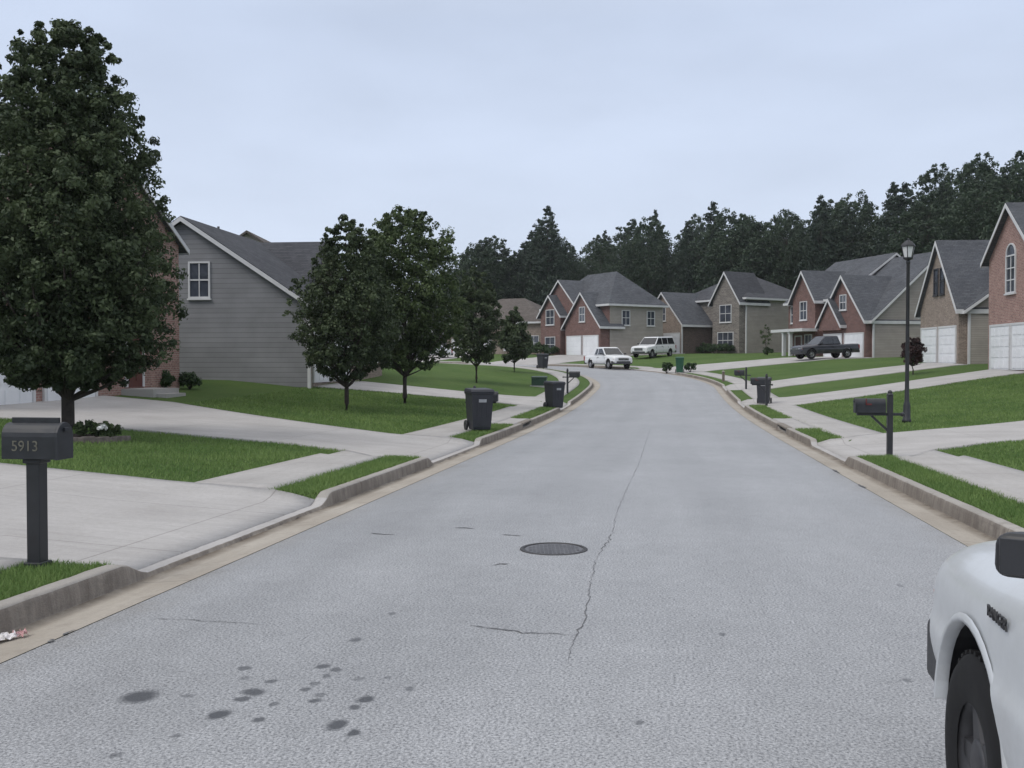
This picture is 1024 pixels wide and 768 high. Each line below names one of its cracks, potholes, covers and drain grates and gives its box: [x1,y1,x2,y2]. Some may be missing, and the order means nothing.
manhole cover [520,542,588,555]
